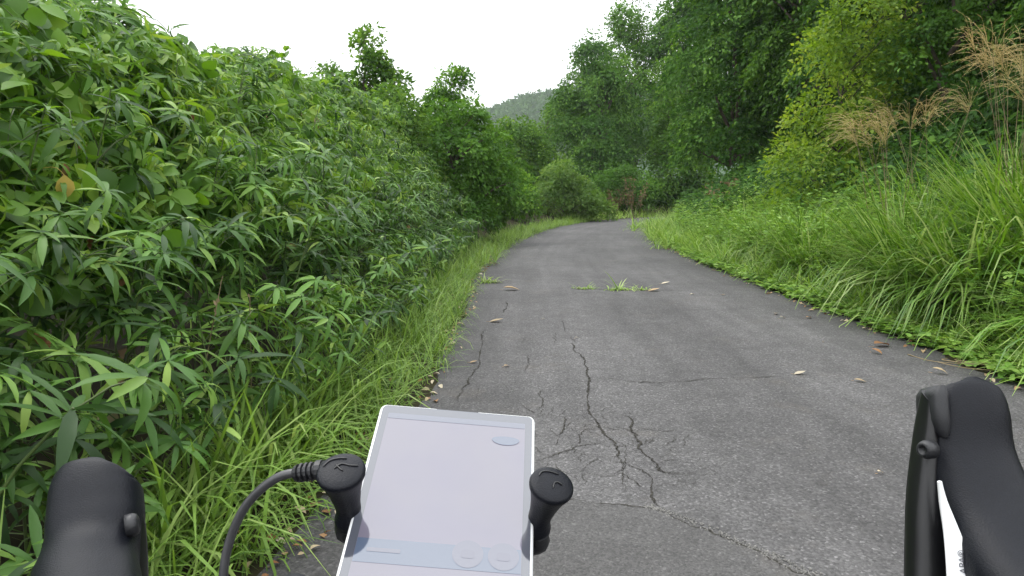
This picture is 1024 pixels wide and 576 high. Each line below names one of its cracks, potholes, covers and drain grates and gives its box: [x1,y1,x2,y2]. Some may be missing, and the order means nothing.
crack [455,330,485,400]
crack [523,319,725,507]
